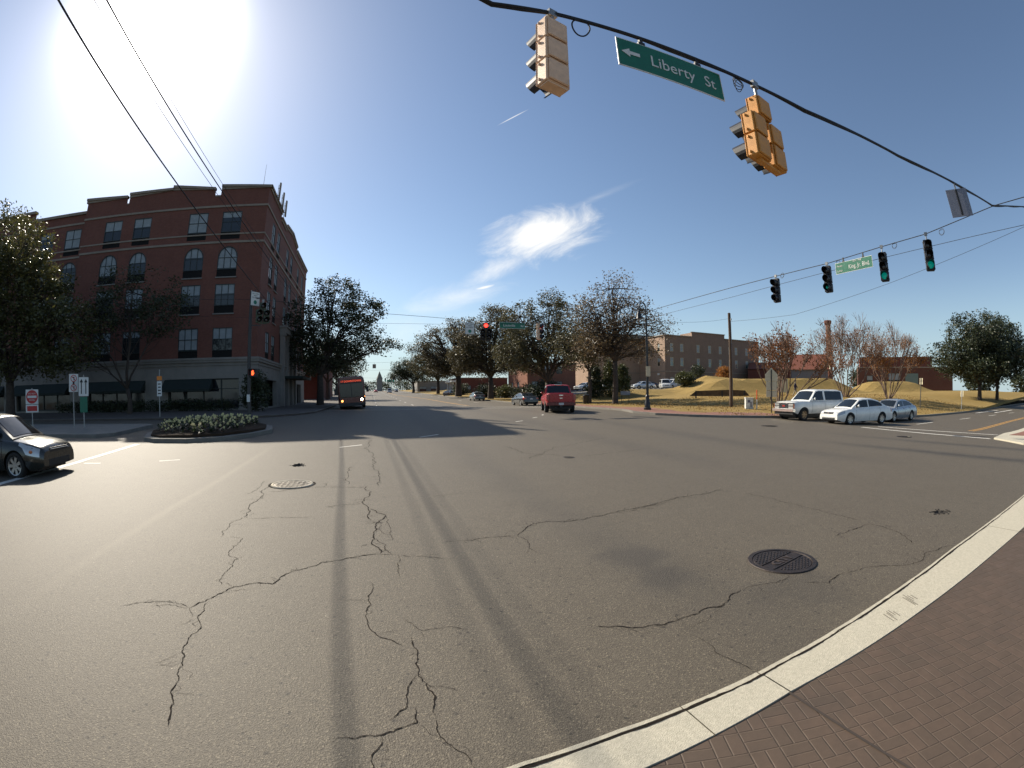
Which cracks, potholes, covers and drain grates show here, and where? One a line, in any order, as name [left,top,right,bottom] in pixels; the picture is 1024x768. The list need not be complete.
manhole cover [747,549,817,574]
crack [523,495,1024,768]
crack [122,442,455,724]
manhole cover [268,480,316,489]
crack [333,583,474,768]
crack [447,488,722,546]
